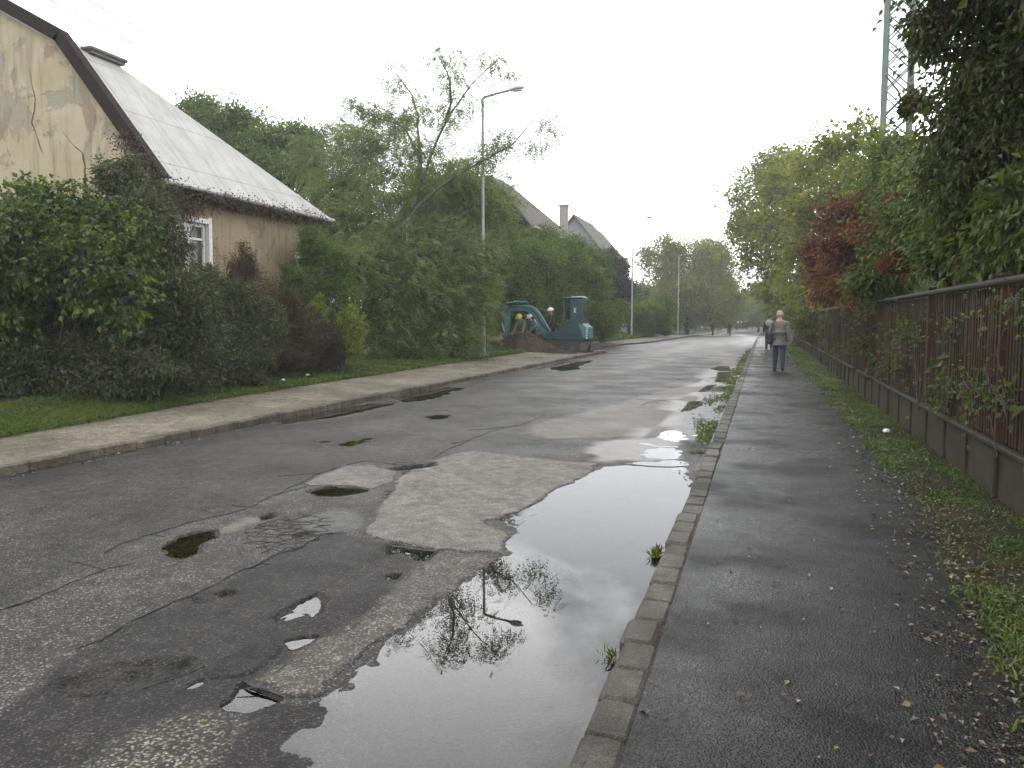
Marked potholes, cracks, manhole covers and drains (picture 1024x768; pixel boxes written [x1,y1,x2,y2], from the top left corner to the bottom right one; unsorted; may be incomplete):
pothole [217,684,283,714]
pothole [160,529,220,560]
pothole [273,591,329,622]
pothole [284,634,322,651]
crack [1,513,348,650]
pothole [381,543,434,561]
pothole [305,485,370,497]
